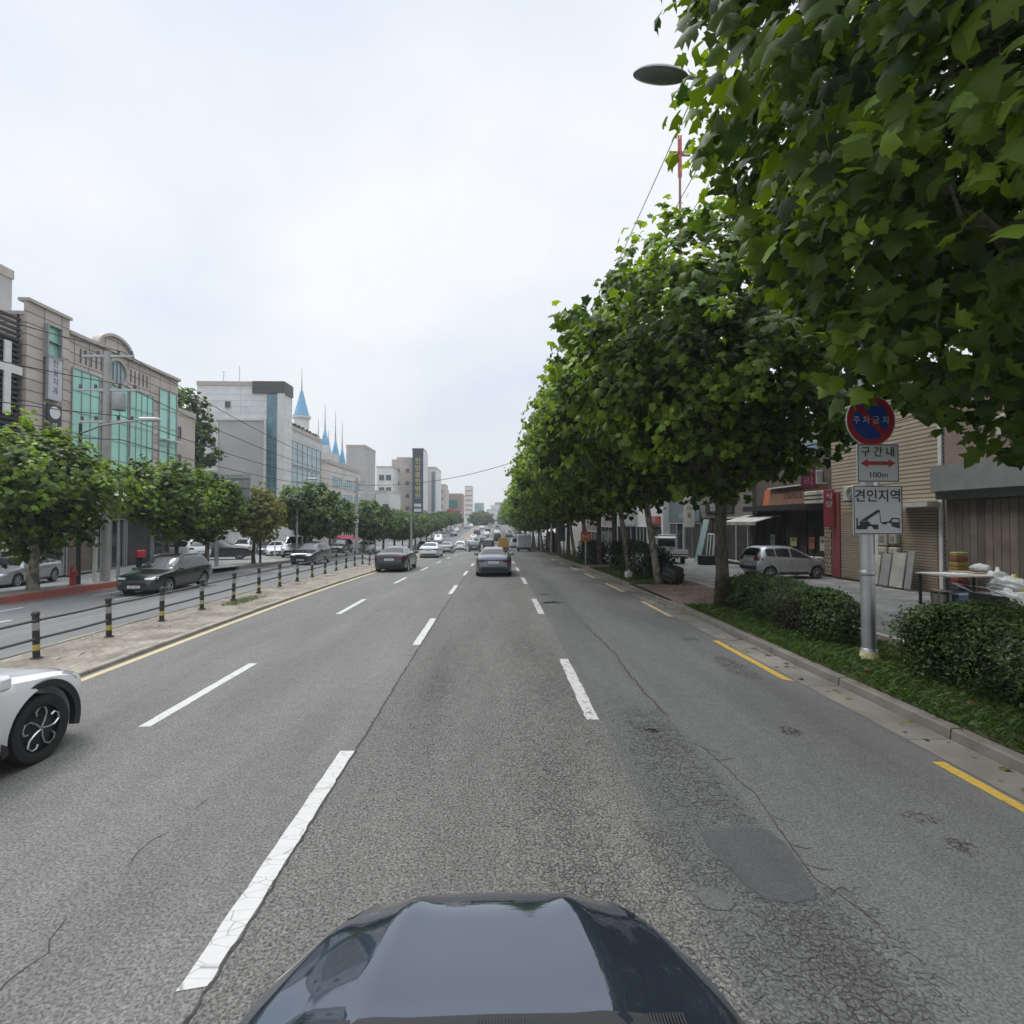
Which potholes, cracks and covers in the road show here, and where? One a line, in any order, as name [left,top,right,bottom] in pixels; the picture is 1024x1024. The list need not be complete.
crack [0,800,206,990]
crack [486,616,714,973]
crack [597,696,968,1024]
crack [901,811,980,857]
